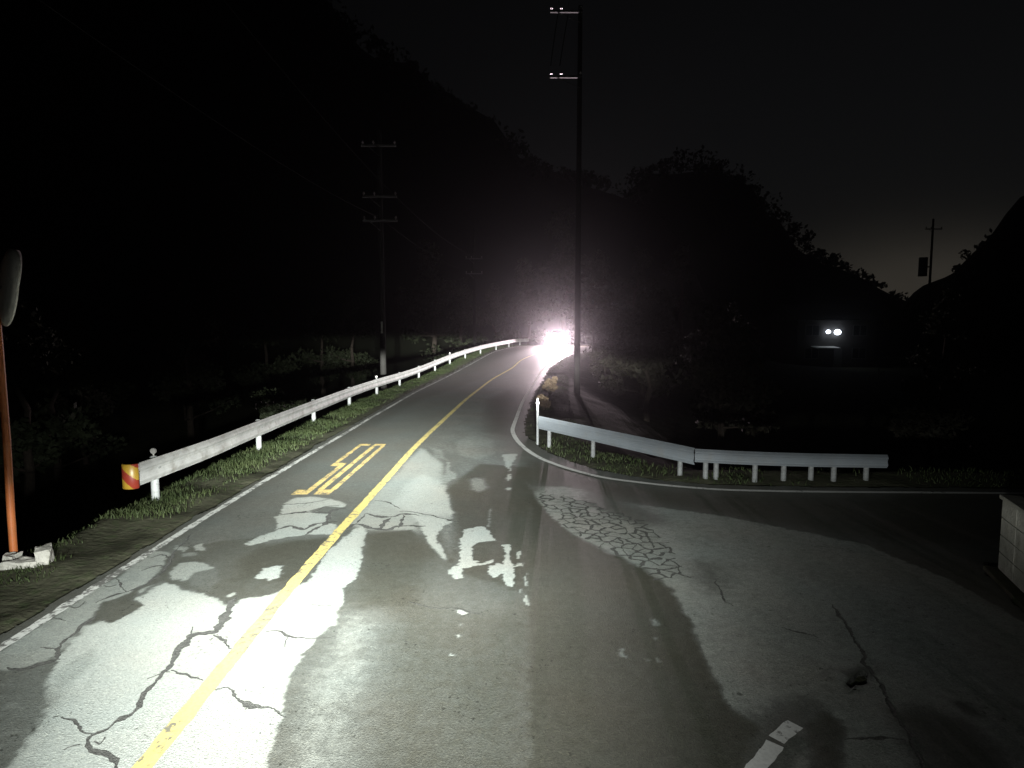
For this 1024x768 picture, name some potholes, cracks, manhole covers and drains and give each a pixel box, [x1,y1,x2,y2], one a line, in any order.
crack [782,605,924,768]
pothole [837,666,879,693]
crack [7,534,286,768]
crack [536,491,691,580]
crack [276,499,459,535]
